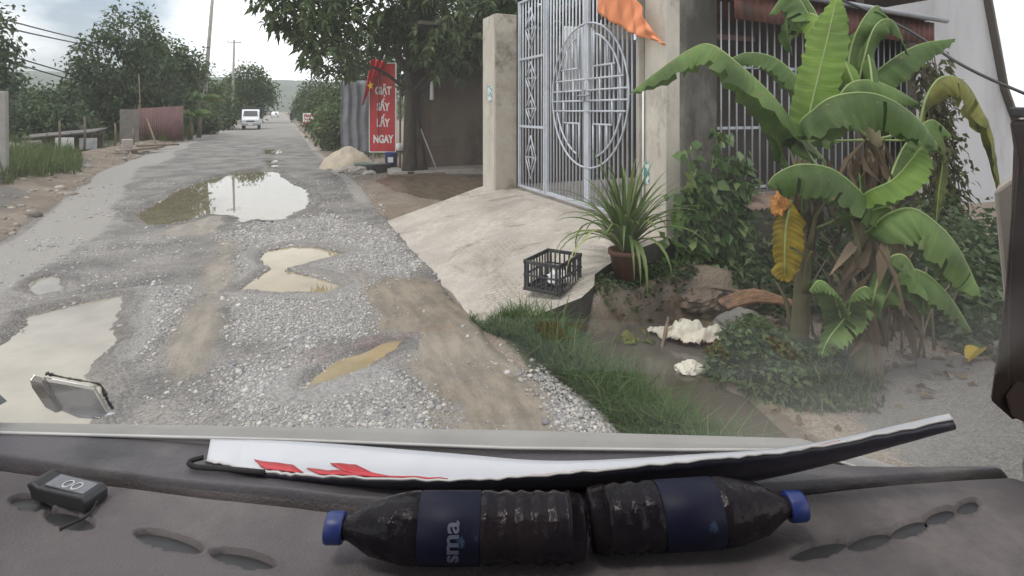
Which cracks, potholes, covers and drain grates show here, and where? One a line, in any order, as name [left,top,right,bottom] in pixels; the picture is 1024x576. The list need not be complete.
pothole [217,241,362,298]
pothole [0,286,148,424]
pothole [5,271,82,301]
pothole [120,168,324,228]
pothole [275,331,424,402]
